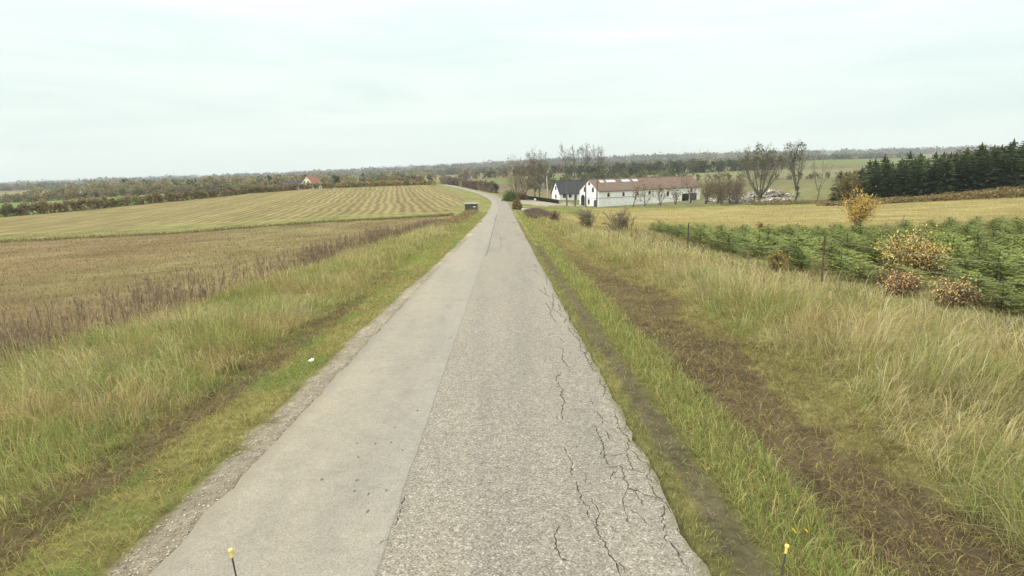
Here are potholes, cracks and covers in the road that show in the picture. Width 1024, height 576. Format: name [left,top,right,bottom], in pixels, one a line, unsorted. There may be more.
crack [536,271,689,576]
